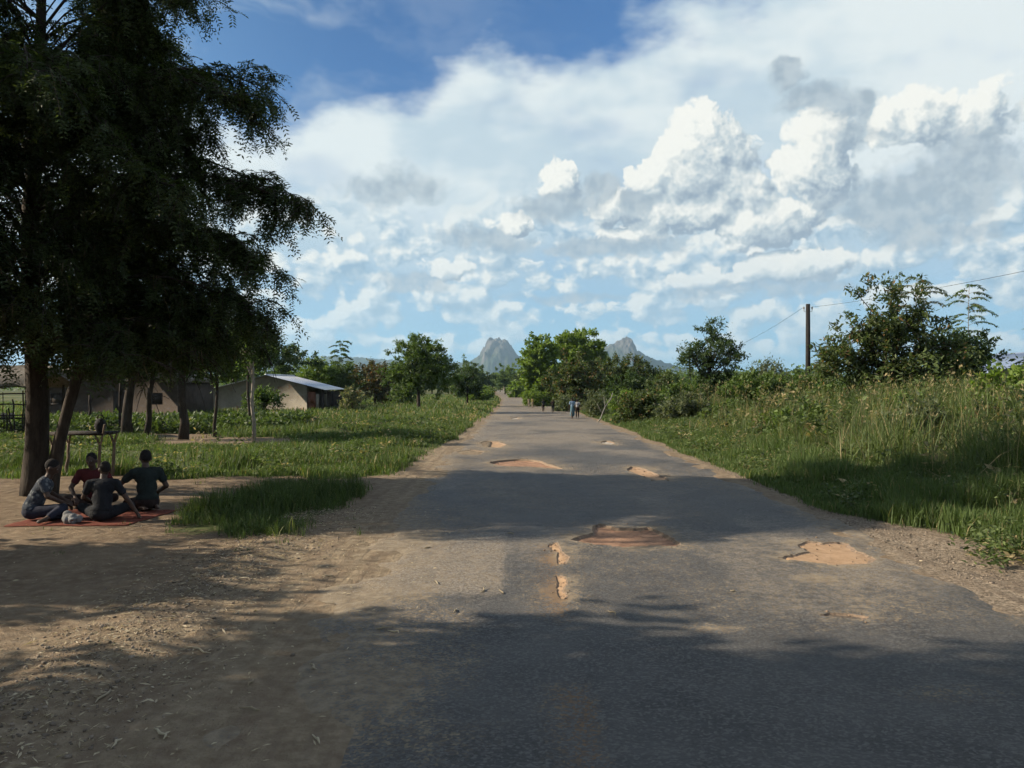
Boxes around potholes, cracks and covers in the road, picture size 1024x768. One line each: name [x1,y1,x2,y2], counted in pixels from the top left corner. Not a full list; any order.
pothole [543,542,570,565]
pothole [627,465,682,481]
pothole [547,575,572,600]
pothole [571,523,681,547]
pothole [487,458,562,469]
pothole [766,536,877,569]
